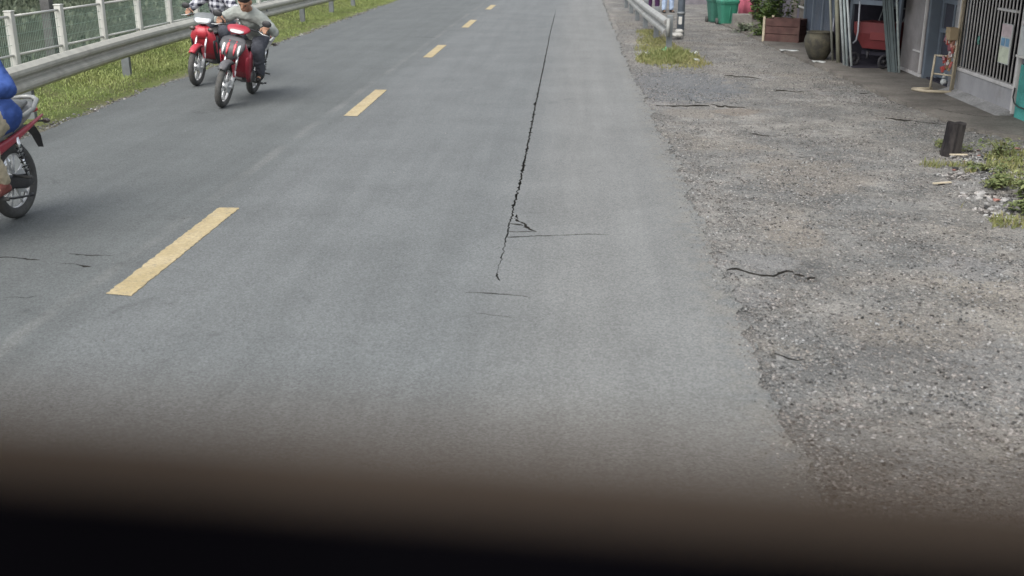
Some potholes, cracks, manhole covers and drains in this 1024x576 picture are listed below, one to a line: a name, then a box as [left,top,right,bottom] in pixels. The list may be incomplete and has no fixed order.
crack [885,108,998,127]
crack [467,11,601,298]
